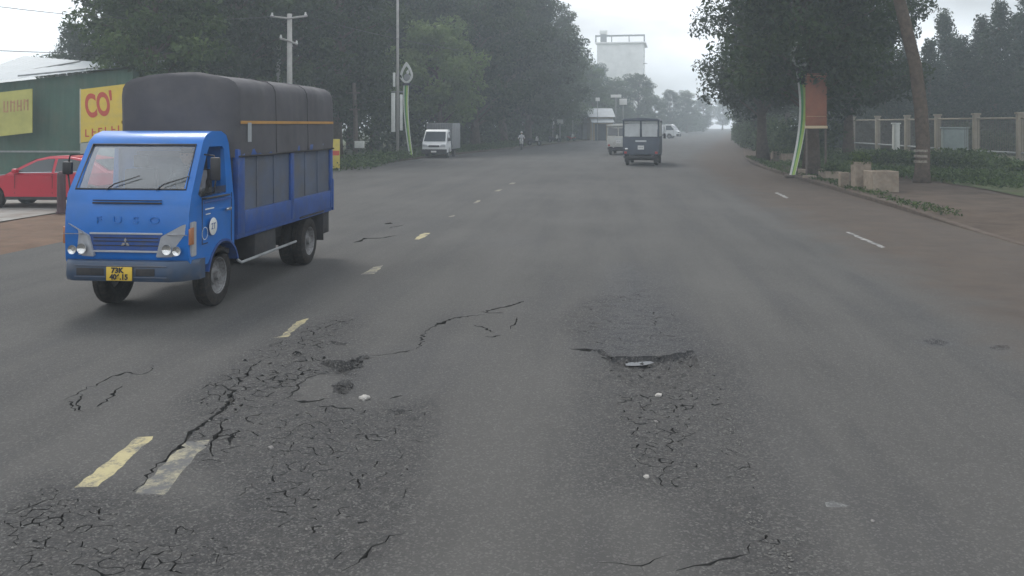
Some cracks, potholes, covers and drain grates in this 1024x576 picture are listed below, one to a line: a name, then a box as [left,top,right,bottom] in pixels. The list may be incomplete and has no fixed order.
pothole [593,349,699,394]
crack [373,301,524,356]
crack [618,387,698,487]
crack [133,319,425,573]
pothole [318,355,369,377]
crack [3,488,236,576]
pothole [923,338,949,346]
pothole [331,379,355,396]
crack [66,368,154,411]
crack [597,534,787,575]
